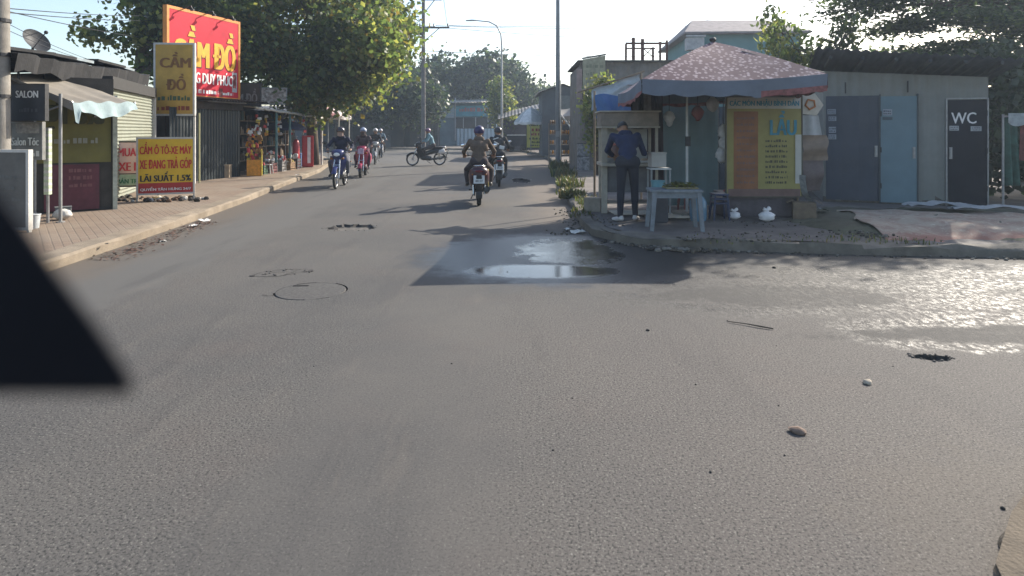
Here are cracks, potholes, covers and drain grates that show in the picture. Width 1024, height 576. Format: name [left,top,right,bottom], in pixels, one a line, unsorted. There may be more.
pothole [907,353,955,362]
pothole [326,223,377,231]
manhole cover [273,282,348,300]
